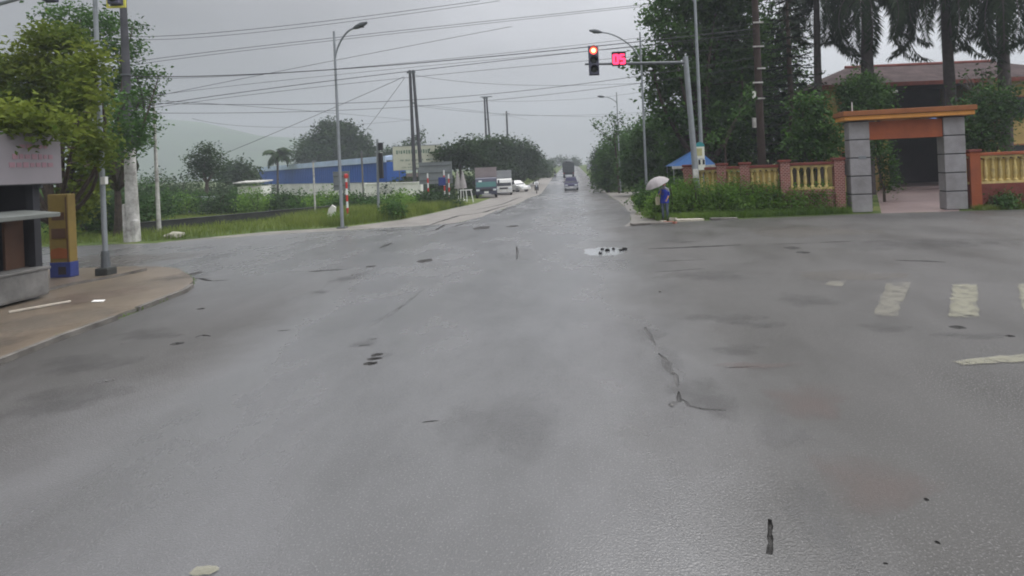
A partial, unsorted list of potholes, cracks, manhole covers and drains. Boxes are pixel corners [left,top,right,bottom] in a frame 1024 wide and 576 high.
pothole [583,247,628,256]
